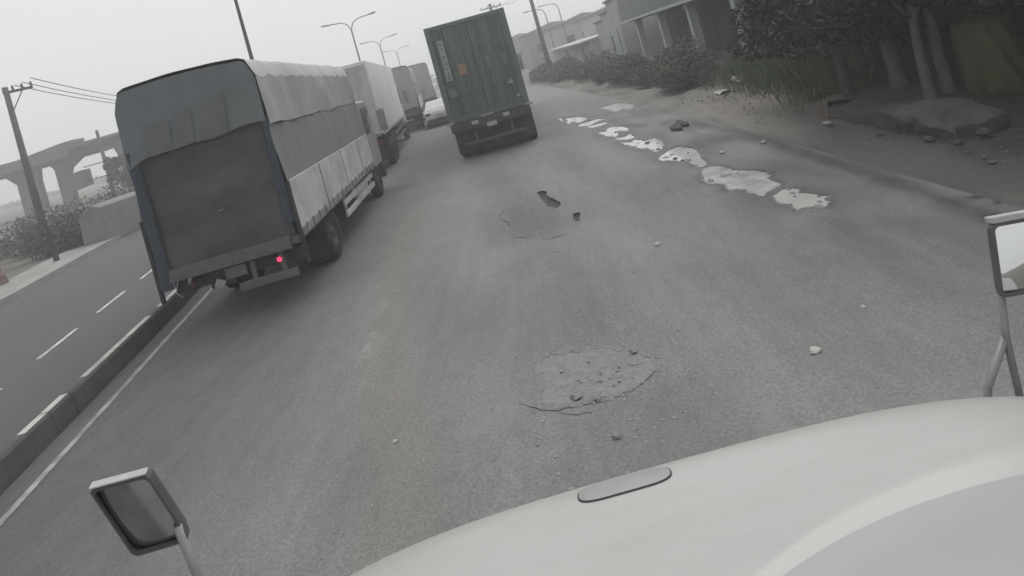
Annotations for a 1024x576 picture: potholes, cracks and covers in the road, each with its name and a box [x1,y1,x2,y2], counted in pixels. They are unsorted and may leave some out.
crack [497,210,564,253]
pothole [537,191,562,209]
